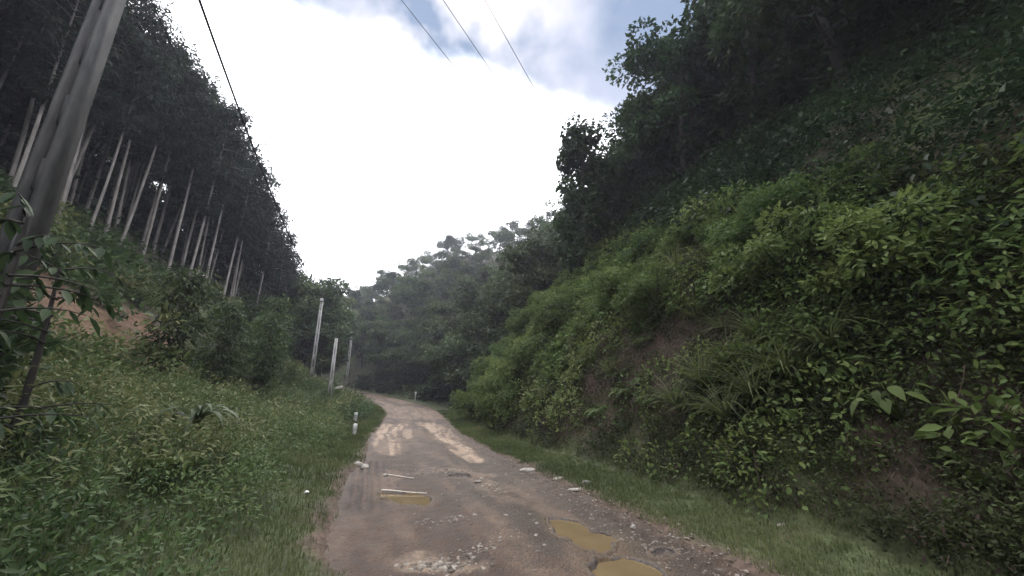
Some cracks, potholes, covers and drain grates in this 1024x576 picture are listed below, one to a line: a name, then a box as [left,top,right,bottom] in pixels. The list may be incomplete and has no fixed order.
pothole [546,516,626,556]
pothole [581,554,671,576]
pothole [645,546,680,561]
pothole [375,490,436,506]
